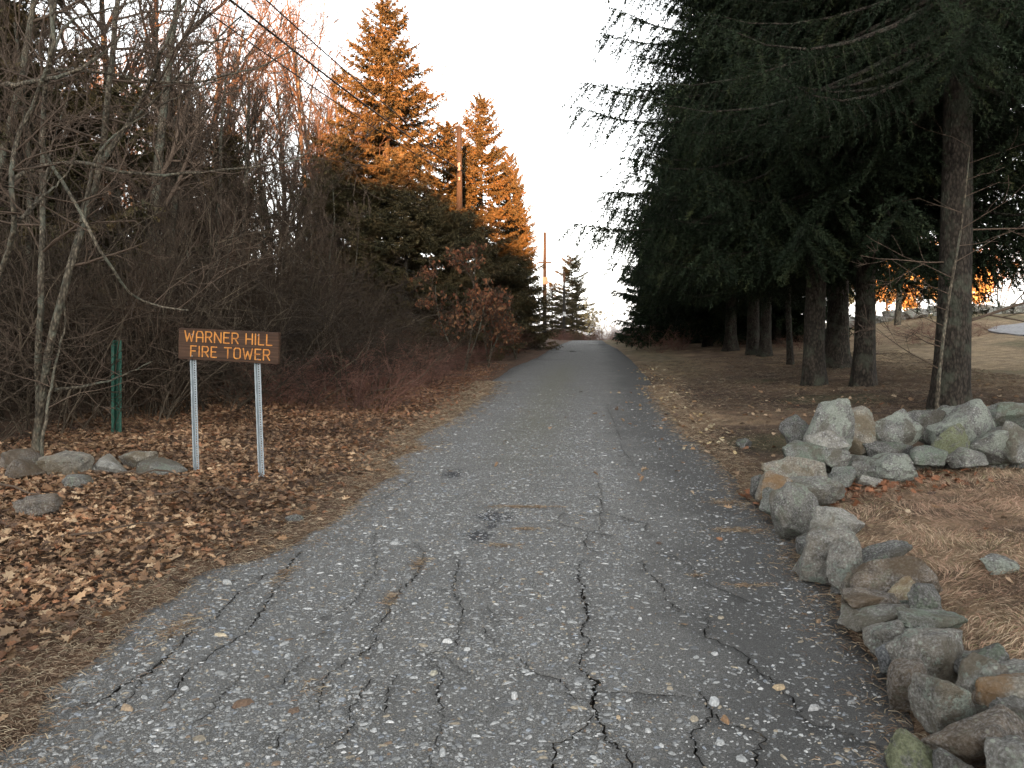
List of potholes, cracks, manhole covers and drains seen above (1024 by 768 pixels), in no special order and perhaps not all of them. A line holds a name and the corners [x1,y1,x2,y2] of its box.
crack [167,554,298,700]
crack [324,678,396,756]
crack [689,692,767,768]
crack [496,561,685,768]
crack [318,544,428,703]
crack [641,552,853,737]
crack [70,633,190,709]
